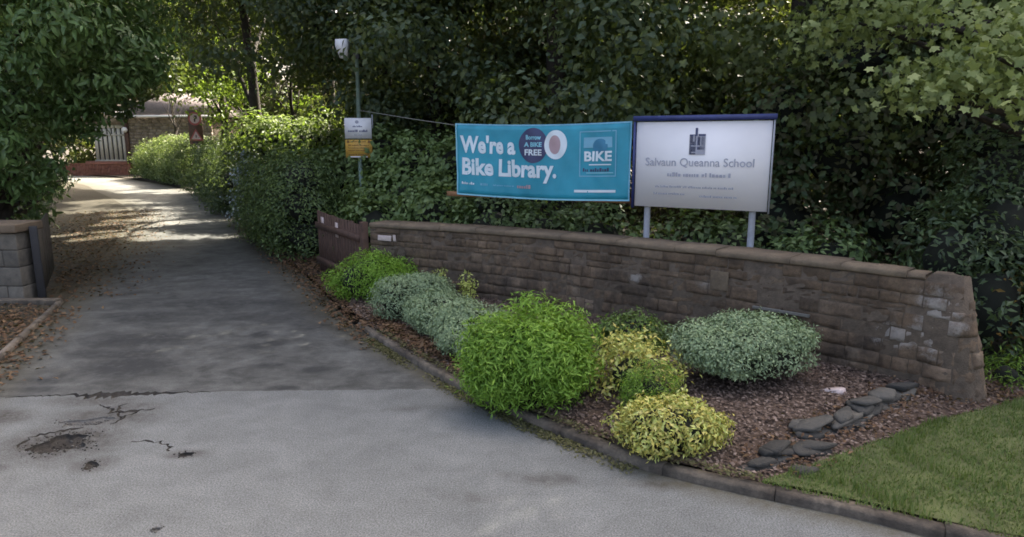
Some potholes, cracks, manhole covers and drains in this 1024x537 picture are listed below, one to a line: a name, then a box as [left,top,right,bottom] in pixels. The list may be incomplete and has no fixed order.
pothole [81,458,102,471]
crack [7,390,208,449]
crack [131,440,174,451]
pothole [14,428,110,459]
